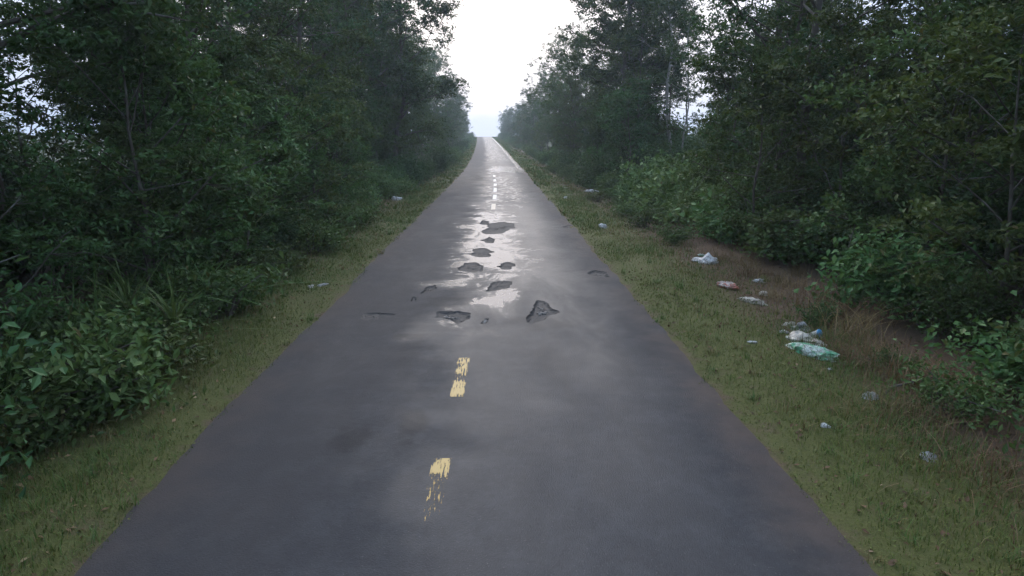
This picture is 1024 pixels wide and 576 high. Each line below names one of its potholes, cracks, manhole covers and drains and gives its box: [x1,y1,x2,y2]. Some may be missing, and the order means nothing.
pothole [435,311,471,324]
pothole [458,262,484,272]
pothole [470,248,494,257]
pothole [361,312,395,320]
pothole [588,270,609,278]
